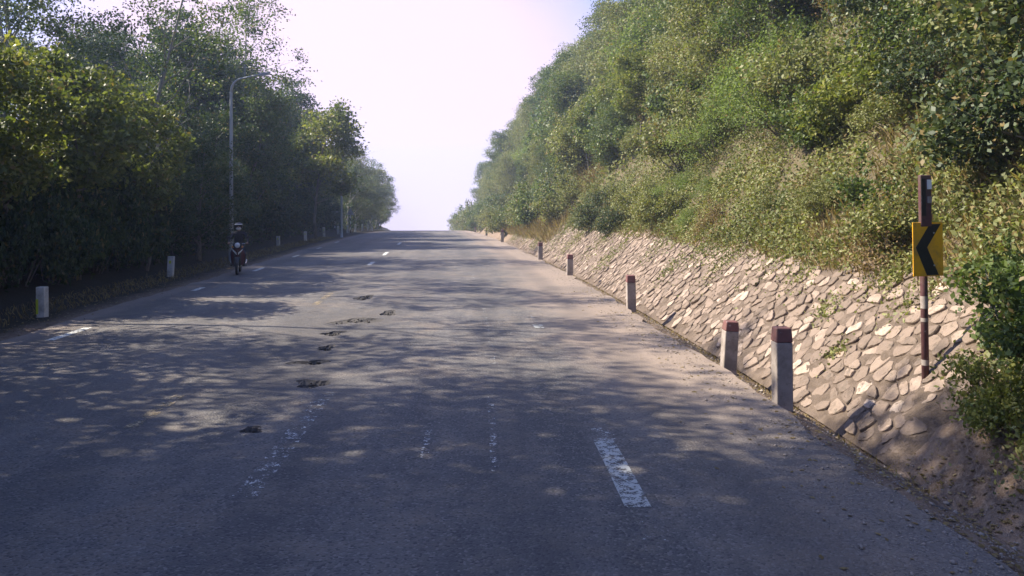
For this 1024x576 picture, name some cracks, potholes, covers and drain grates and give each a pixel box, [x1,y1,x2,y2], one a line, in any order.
pothole [296,379,330,388]
